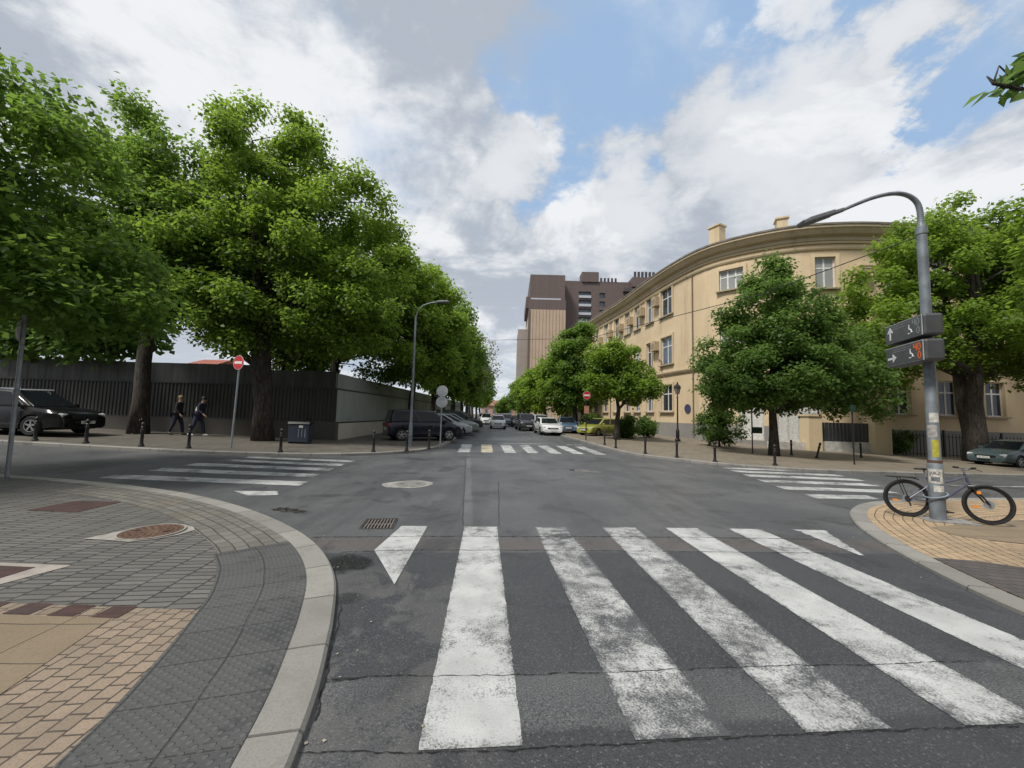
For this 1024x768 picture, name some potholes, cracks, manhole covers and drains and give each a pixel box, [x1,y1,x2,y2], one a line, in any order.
manhole cover [84,523,195,542]
manhole cover [382,480,433,488]
drain grate [359,518,398,529]
crack [314,606,342,720]
